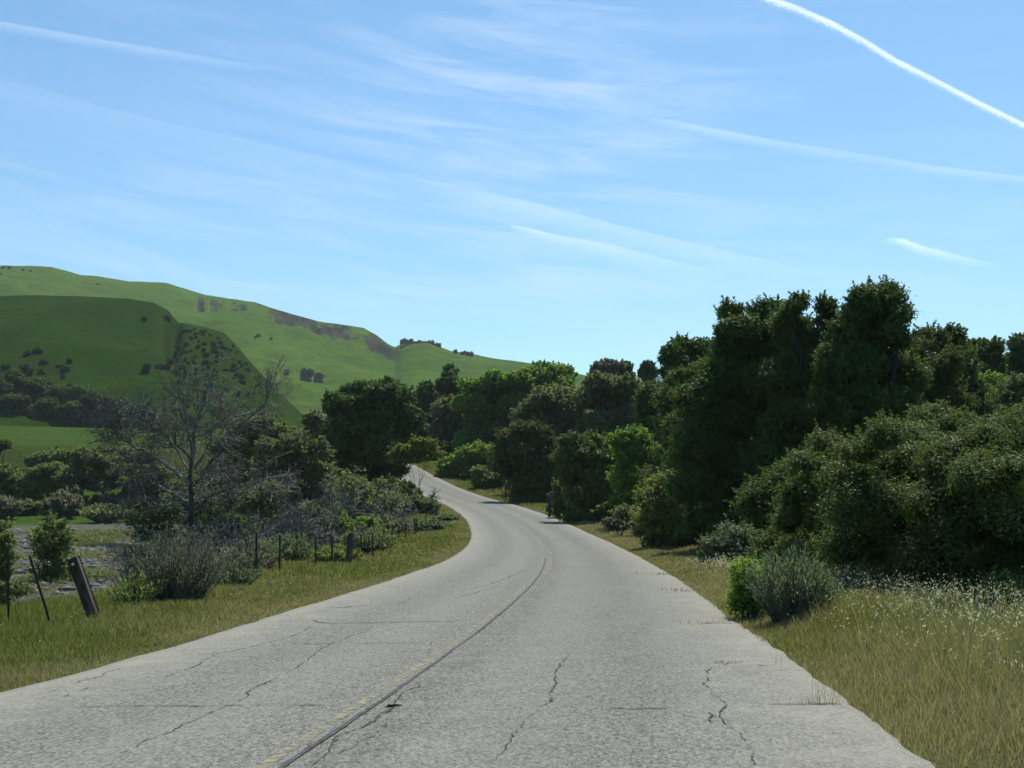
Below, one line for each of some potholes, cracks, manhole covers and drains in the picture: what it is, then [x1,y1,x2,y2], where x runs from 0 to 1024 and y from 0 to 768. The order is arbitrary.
crack [19,571,523,763]
crack [492,658,567,762]
crack [702,662,755,768]
